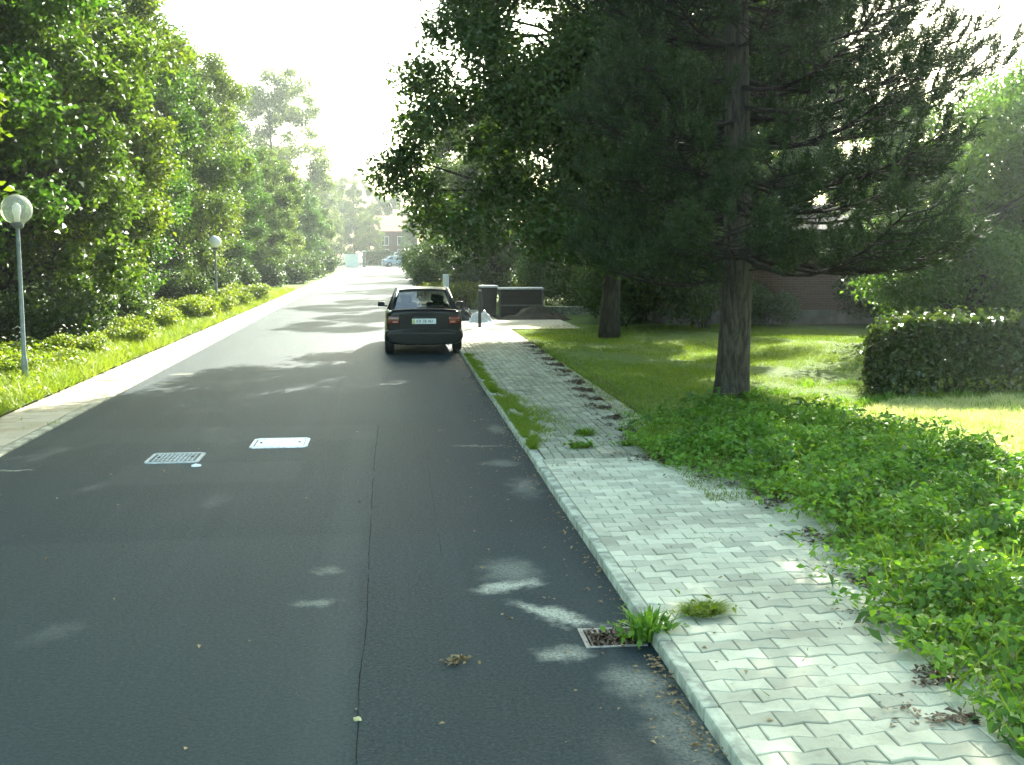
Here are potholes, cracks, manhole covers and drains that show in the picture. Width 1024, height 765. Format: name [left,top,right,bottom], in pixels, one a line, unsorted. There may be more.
manhole cover [249,437,310,449]
drain grate [577,627,648,649]
